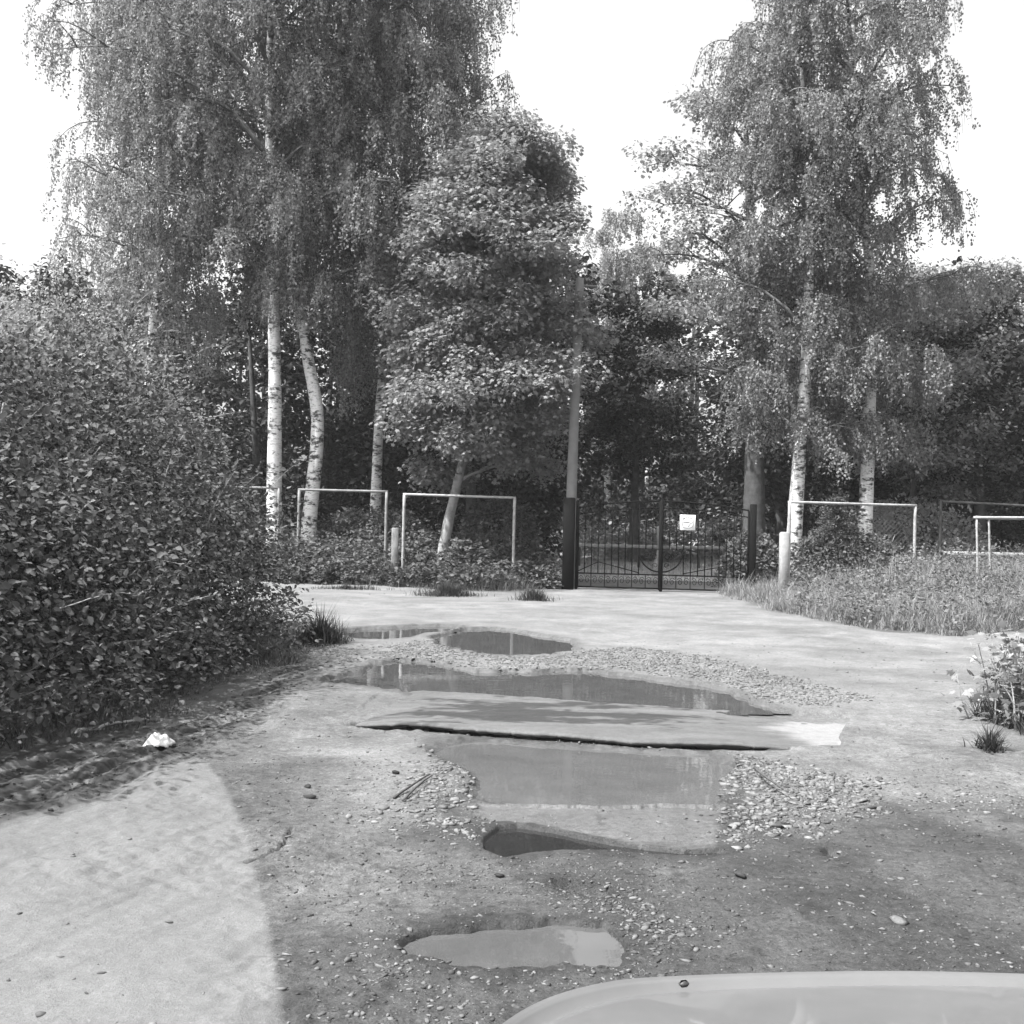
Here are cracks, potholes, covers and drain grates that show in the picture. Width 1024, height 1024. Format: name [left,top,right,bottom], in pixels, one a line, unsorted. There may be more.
pothole [312,657,791,716]
pothole [481,823,728,857]
pothole [424,735,745,812]
pothole [393,918,634,969]
crack [248,827,294,864]
pothole [340,623,460,639]
pothole [427,627,580,655]
